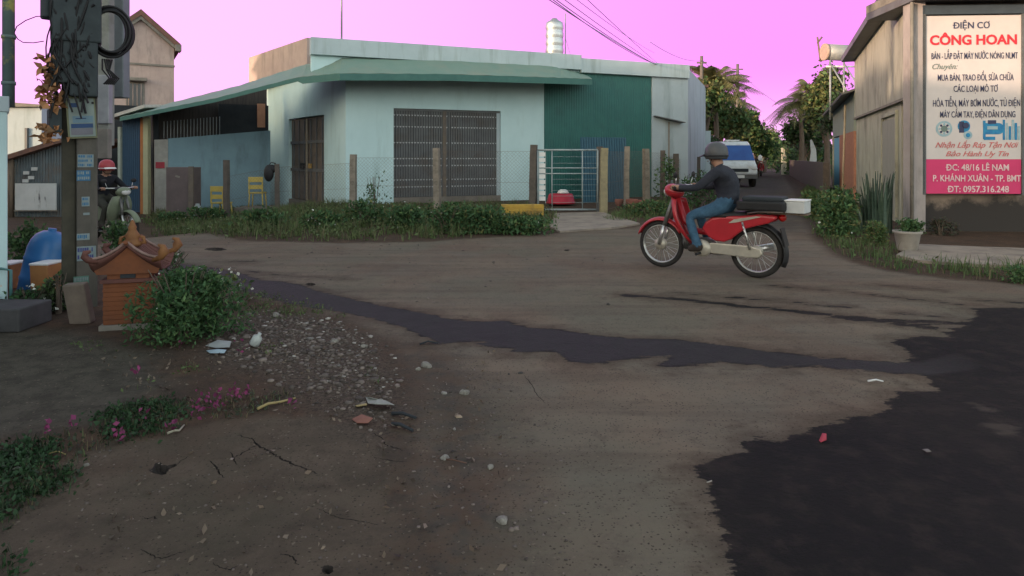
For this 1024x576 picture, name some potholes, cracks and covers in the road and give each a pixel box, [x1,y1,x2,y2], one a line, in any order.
pothole [149,462,177,475]
crack [210,435,318,478]
crack [373,433,407,462]
crack [140,549,186,573]
